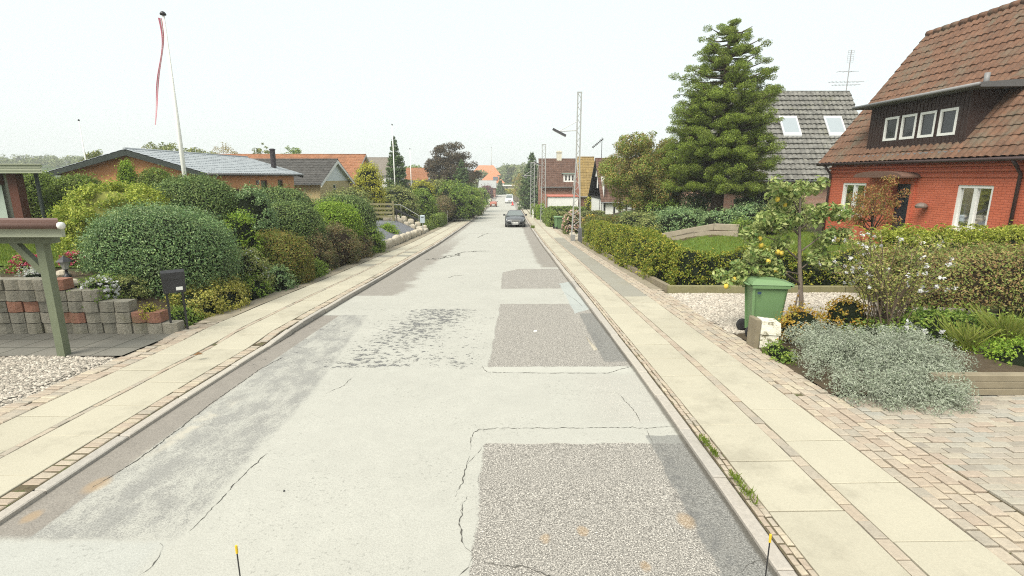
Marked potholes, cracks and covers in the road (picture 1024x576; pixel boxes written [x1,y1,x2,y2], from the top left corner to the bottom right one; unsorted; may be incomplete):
crack [459,395,673,576]
